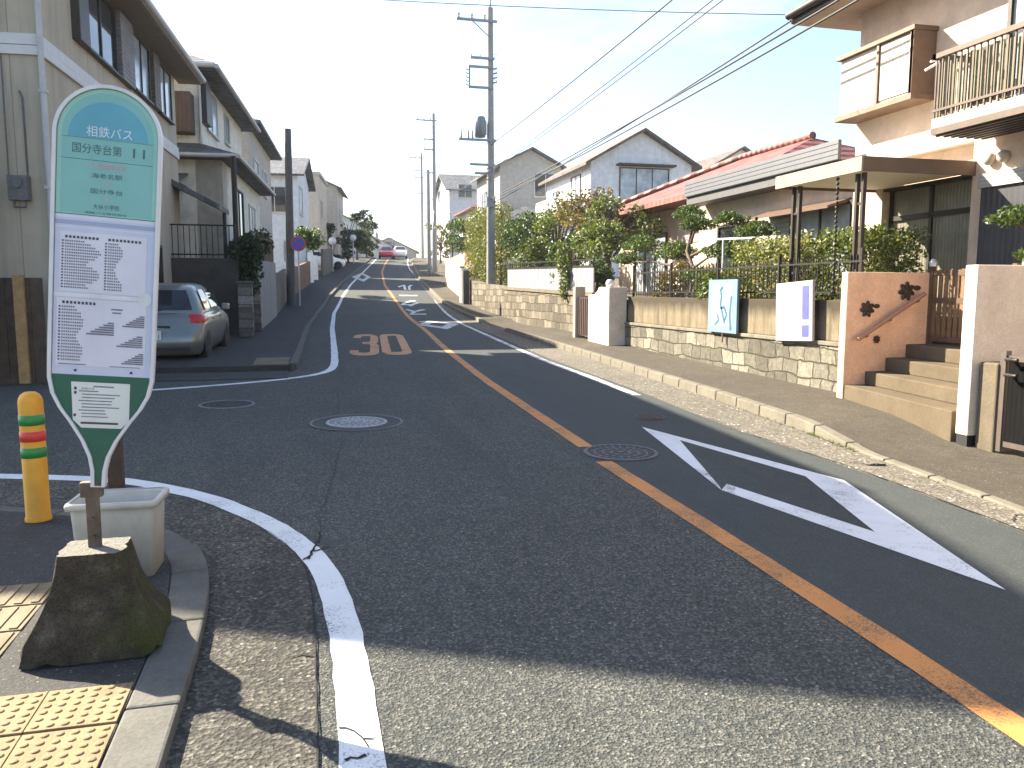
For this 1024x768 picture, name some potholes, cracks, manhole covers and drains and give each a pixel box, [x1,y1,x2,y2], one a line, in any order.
manhole cover [198,400,256,409]
crack [302,395,342,560]
crack [338,727,379,761]
manhole cover [309,414,403,431]
manhole cover [583,444,659,461]
